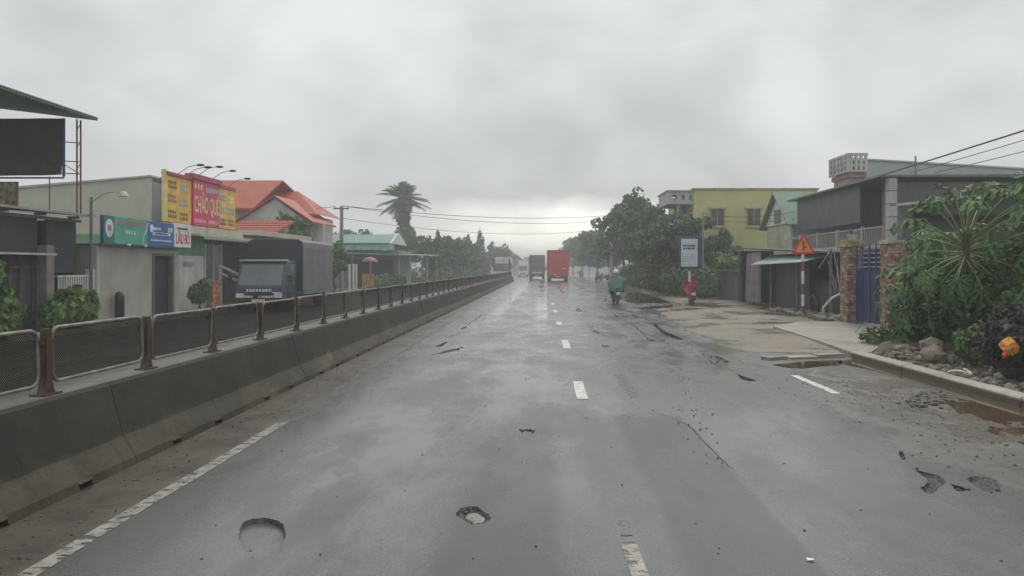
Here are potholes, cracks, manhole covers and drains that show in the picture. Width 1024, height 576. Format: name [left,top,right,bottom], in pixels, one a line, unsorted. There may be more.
pothole [967,476,1002,493]
pothole [915,467,947,494]
crack [599,306,680,356]
crack [621,413,733,469]
pothole [456,506,491,525]
pothole [238,518,286,560]
